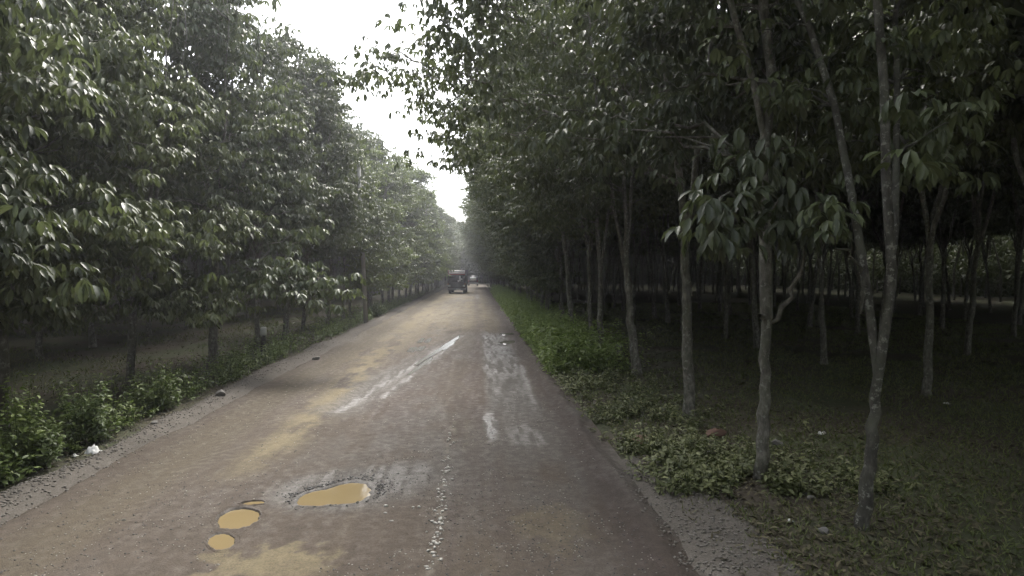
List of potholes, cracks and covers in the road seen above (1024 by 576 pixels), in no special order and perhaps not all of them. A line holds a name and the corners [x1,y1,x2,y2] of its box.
pothole [210,504,267,533]
pothole [283,477,384,510]
pothole [202,530,239,553]
